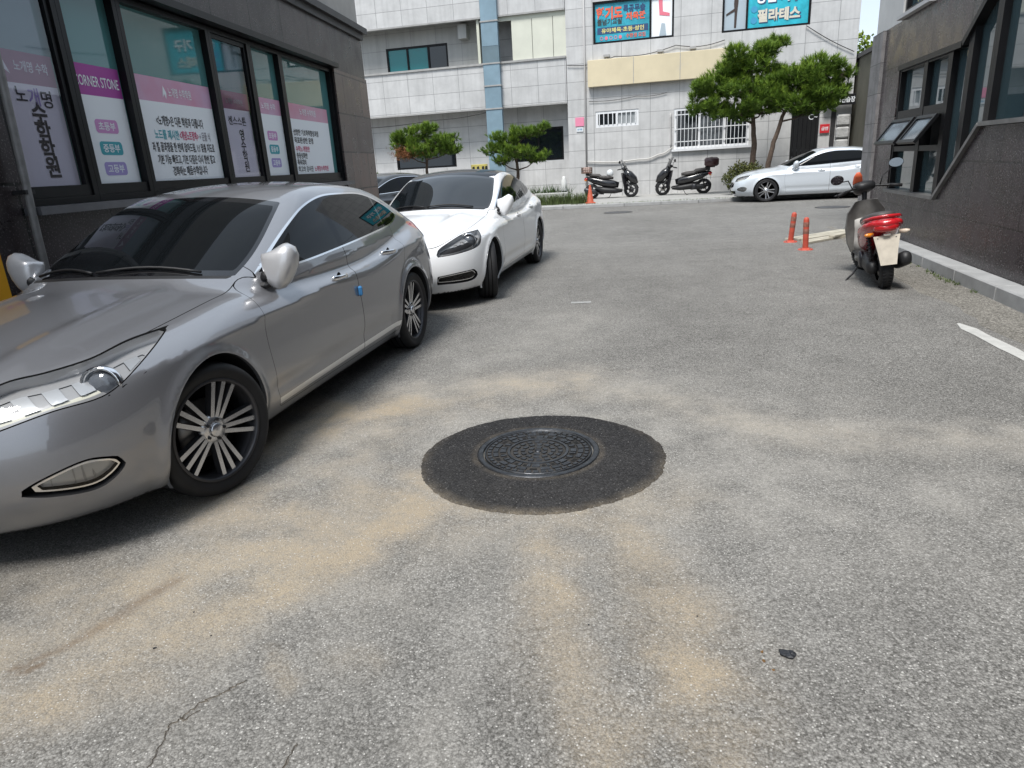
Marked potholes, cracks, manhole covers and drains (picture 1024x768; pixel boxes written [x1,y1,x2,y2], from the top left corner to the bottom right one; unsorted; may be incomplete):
manhole cover [477,428,599,478]
crack [282,743,298,768]
crack [147,680,247,768]
